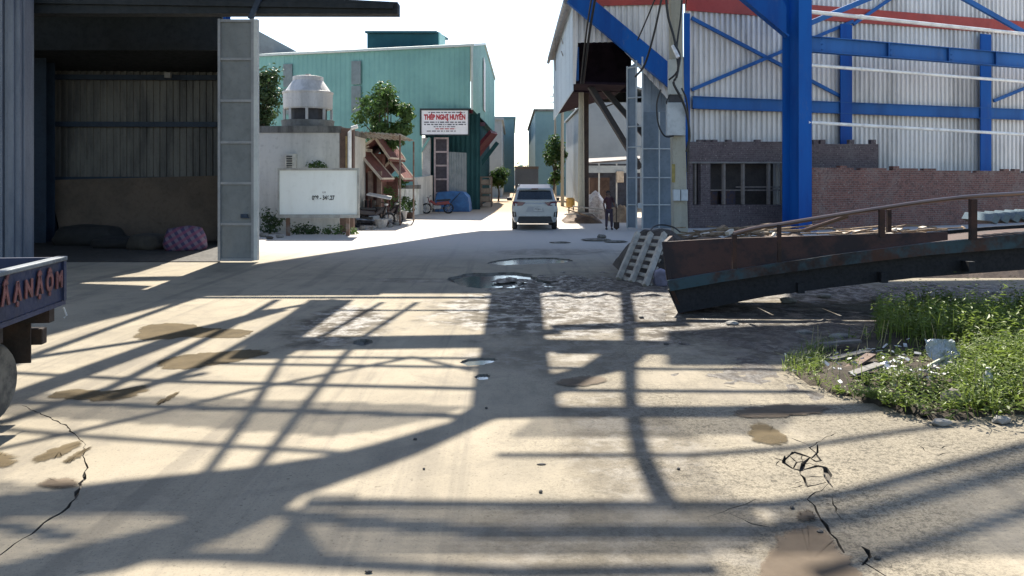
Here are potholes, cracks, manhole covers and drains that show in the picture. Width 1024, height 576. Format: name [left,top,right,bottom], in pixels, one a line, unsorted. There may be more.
crack [0,406,89,555]
crack [776,433,886,576]
pothole [447,272,559,283]
